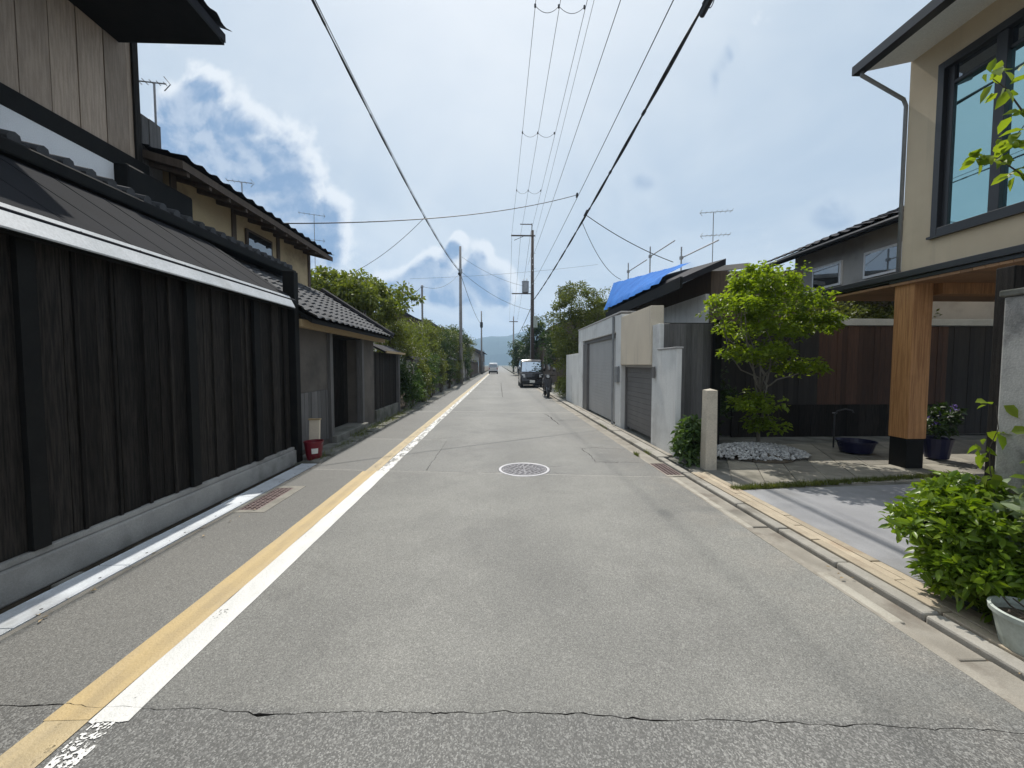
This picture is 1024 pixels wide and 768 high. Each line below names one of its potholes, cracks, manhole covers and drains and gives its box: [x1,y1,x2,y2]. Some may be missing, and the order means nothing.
drain grate [647,462,685,477]
manhole cover [498,463,550,477]
drain grate [232,486,306,513]
crack [0,704,1024,734]
